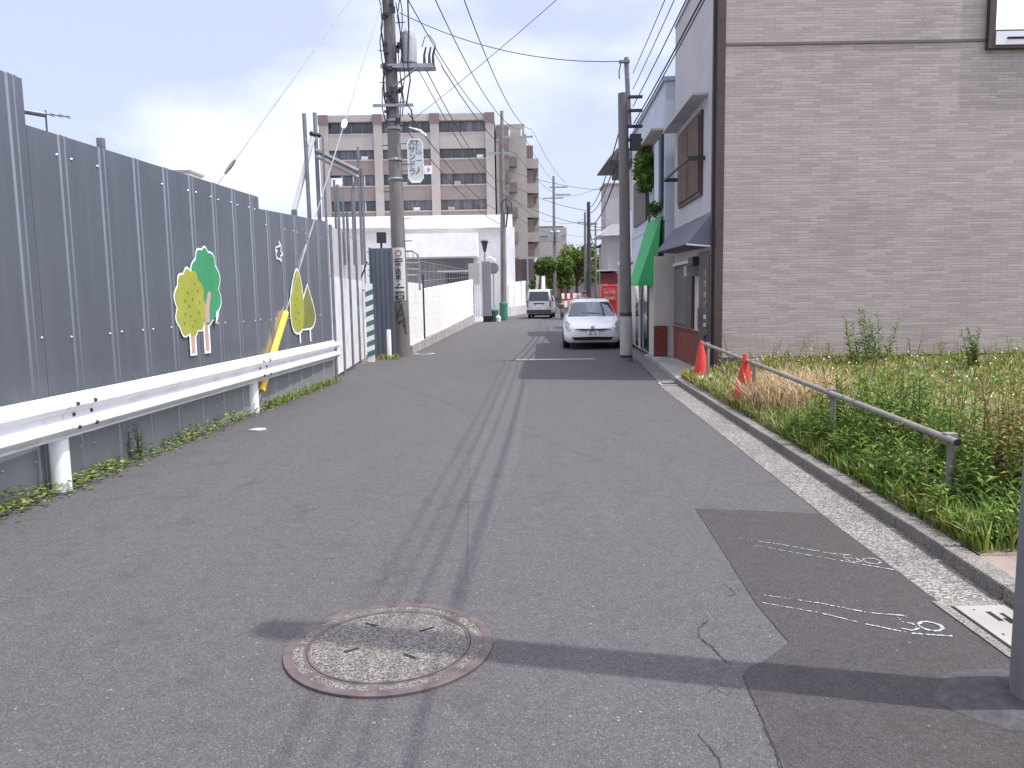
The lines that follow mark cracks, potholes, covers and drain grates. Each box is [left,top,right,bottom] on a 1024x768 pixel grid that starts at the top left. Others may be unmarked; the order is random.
crack [698,619,732,665]
manhole cover [283,603,493,699]
